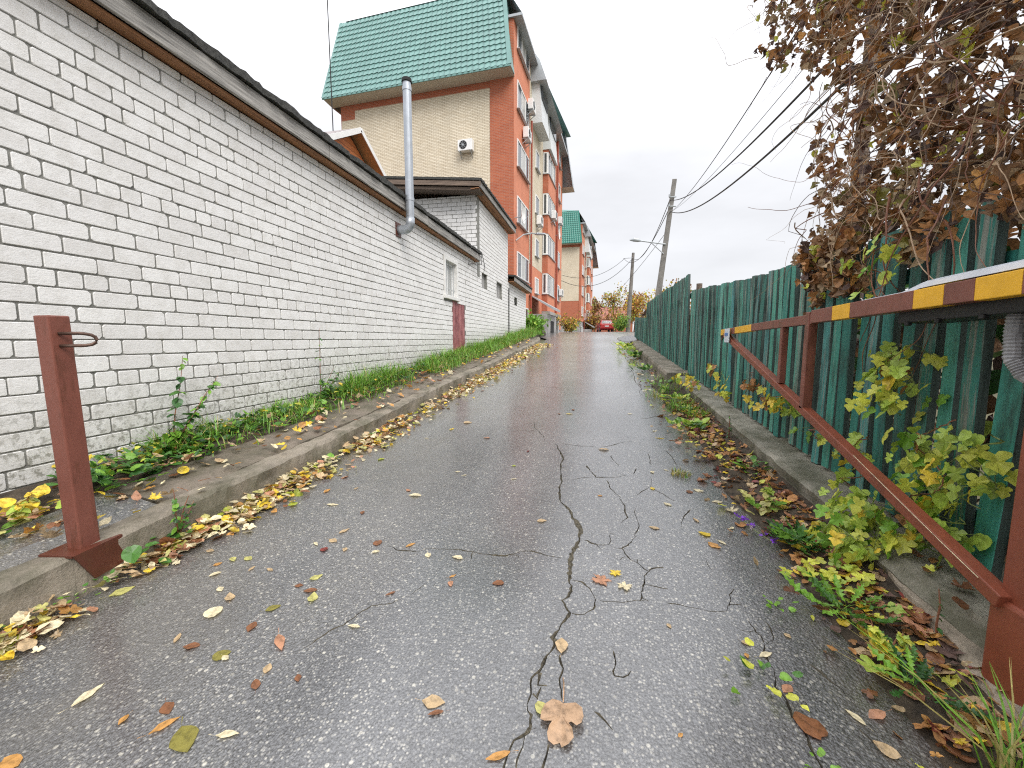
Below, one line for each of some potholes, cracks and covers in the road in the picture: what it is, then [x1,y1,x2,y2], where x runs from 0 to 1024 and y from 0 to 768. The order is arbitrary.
crack [303,586,422,649]
crack [389,425,854,768]
